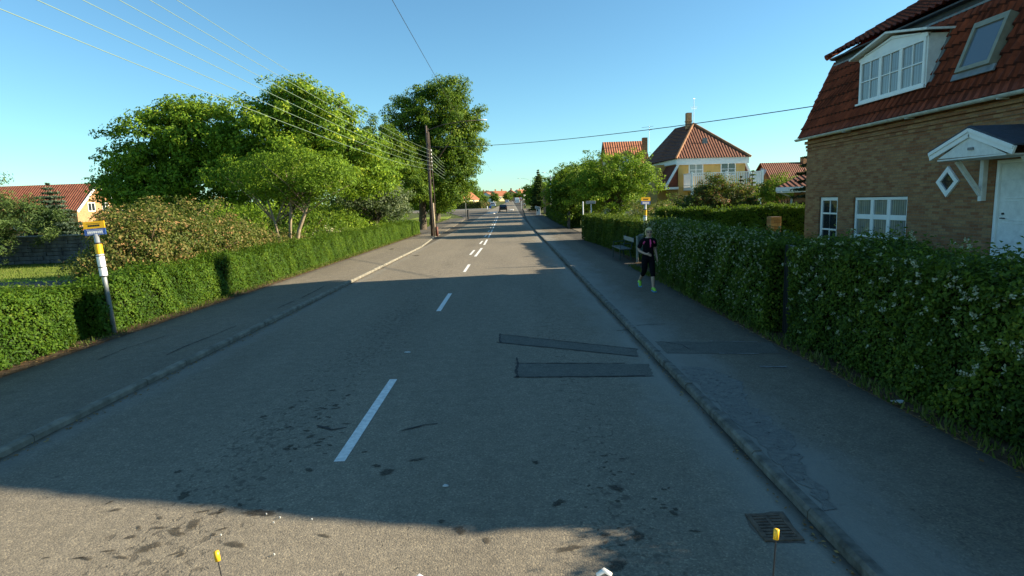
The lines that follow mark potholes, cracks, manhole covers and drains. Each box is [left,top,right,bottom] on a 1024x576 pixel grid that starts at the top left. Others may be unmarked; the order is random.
drain grate [745,513,805,542]
